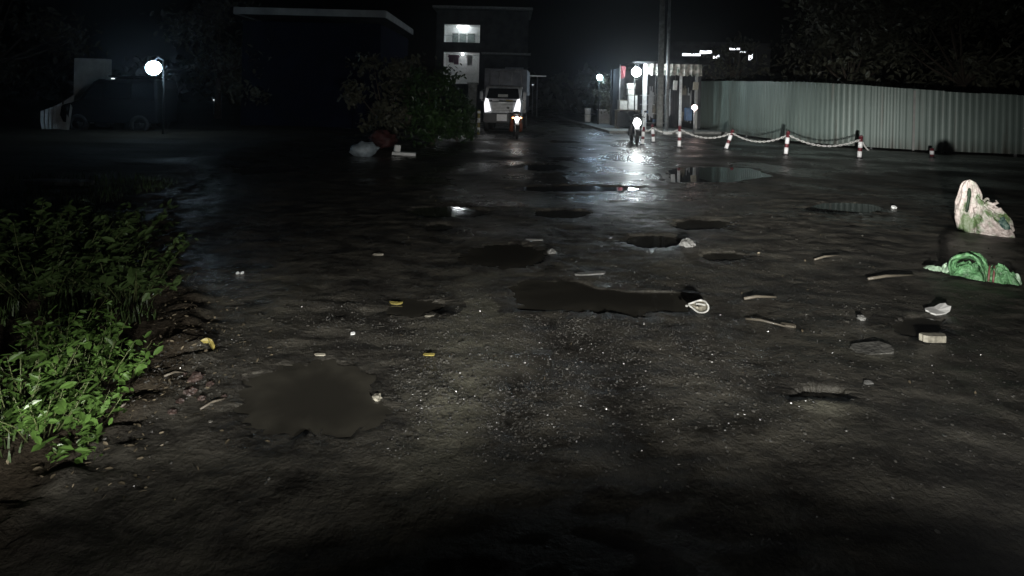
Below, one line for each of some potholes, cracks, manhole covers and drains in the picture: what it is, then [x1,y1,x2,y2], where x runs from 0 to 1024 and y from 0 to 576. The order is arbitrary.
pothole [605,230,701,252]
pothole [444,238,565,275]
pothole [766,375,875,410]
pothole [489,274,733,325]
pothole [518,206,605,222]
pothole [390,202,504,220]
pothole [659,215,748,233]
pothole [683,247,763,267]
pothole [204,348,416,453]
pothole [492,183,653,194]
pothole [363,292,467,326]
